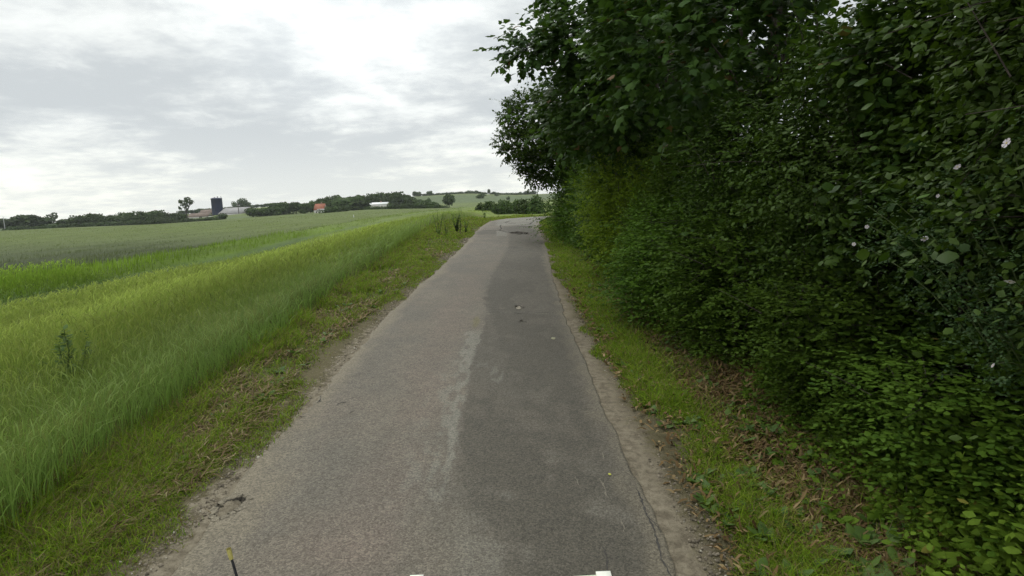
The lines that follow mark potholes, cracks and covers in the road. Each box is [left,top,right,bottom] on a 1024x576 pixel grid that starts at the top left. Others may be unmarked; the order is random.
pothole [208,493,253,522]
crack [602,488,671,576]
